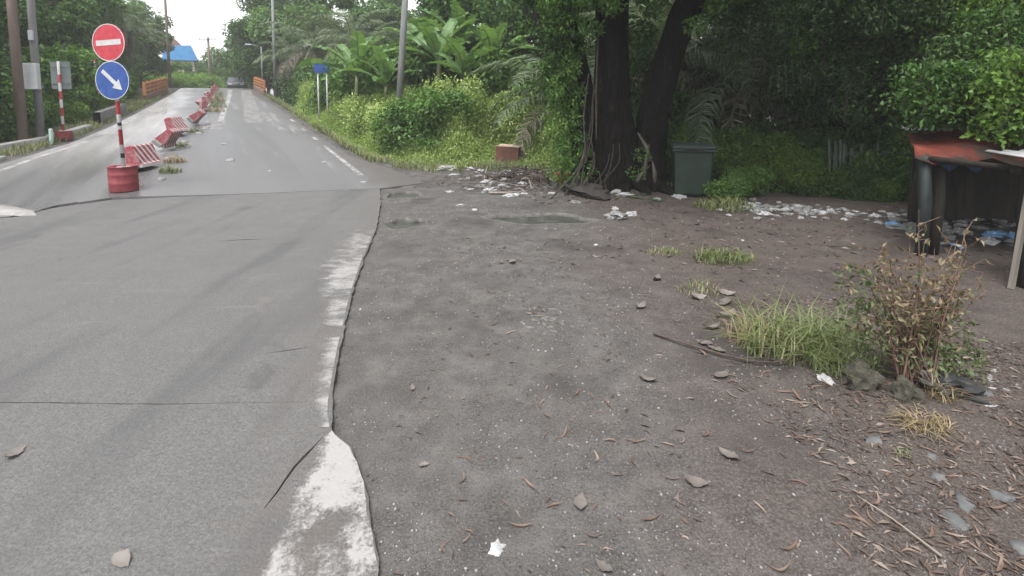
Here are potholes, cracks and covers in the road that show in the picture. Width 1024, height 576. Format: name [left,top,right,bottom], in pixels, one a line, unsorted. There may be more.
pothole [386,191,422,199]
pothole [380,218,427,230]
crack [264,438,322,508]
pothole [480,212,603,225]
